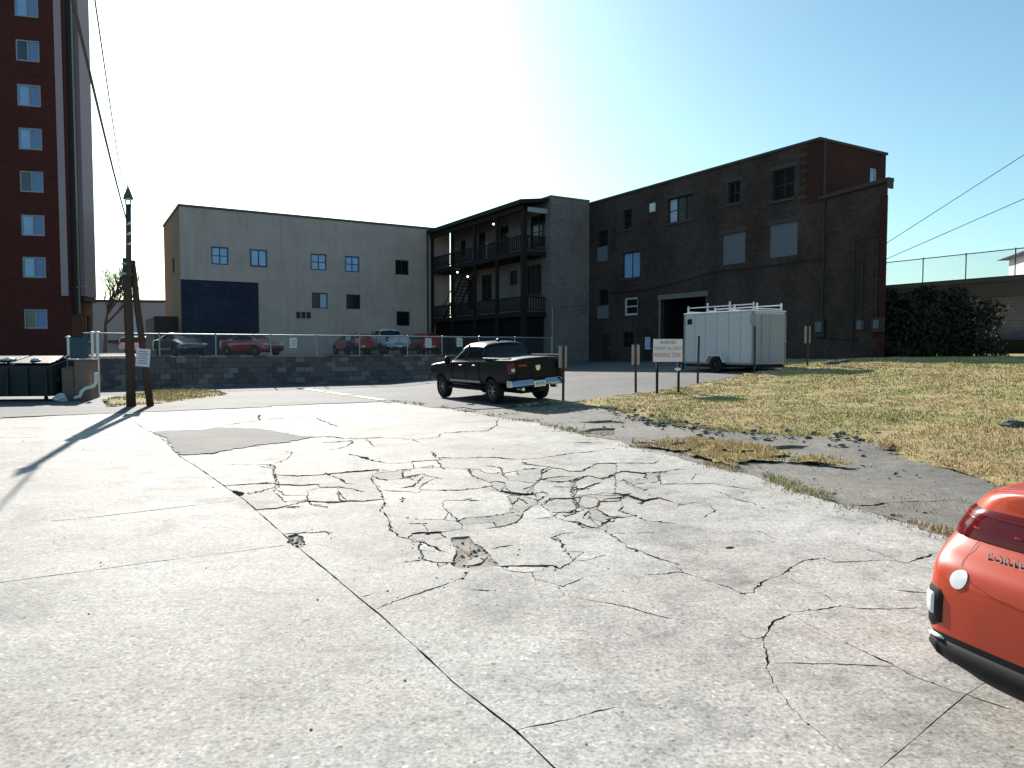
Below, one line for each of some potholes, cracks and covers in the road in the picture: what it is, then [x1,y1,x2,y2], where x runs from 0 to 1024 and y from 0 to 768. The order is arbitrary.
pothole [286,534,306,548]
crack [556,585,677,620]
crack [183,415,936,609]
pothole [451,536,501,569]
crack [743,590,1023,762]
